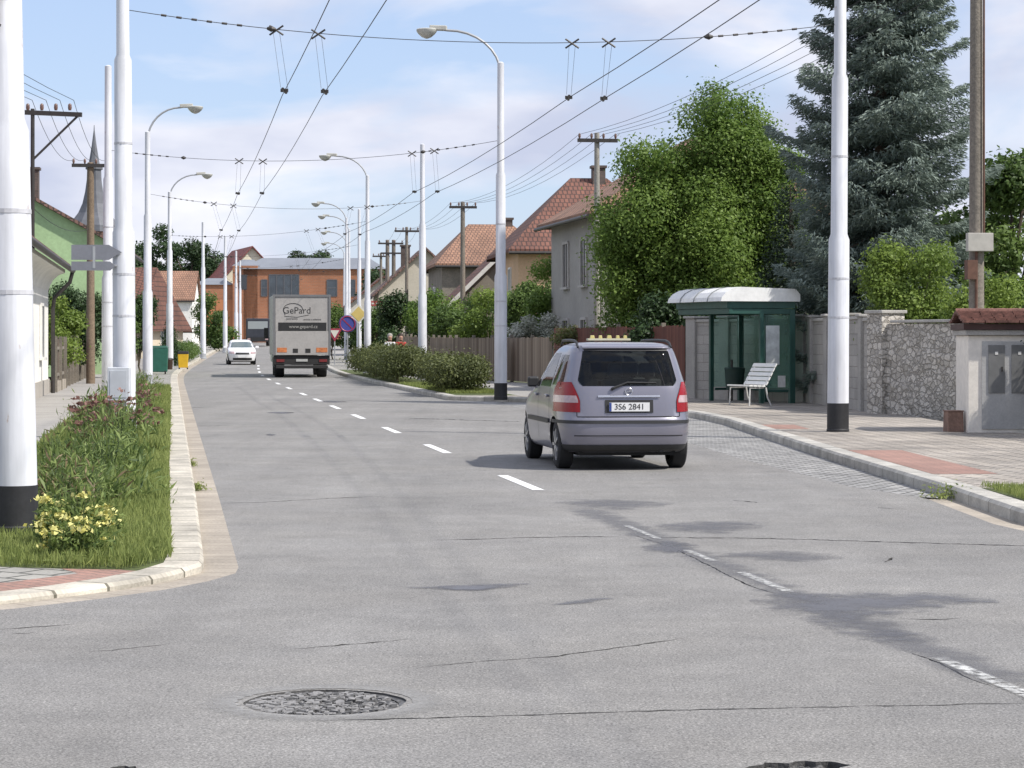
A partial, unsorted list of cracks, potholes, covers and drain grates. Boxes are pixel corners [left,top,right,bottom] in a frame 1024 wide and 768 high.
crack [427,638,683,667]
crack [13,624,70,634]
manhole cover [243,690,406,715]
